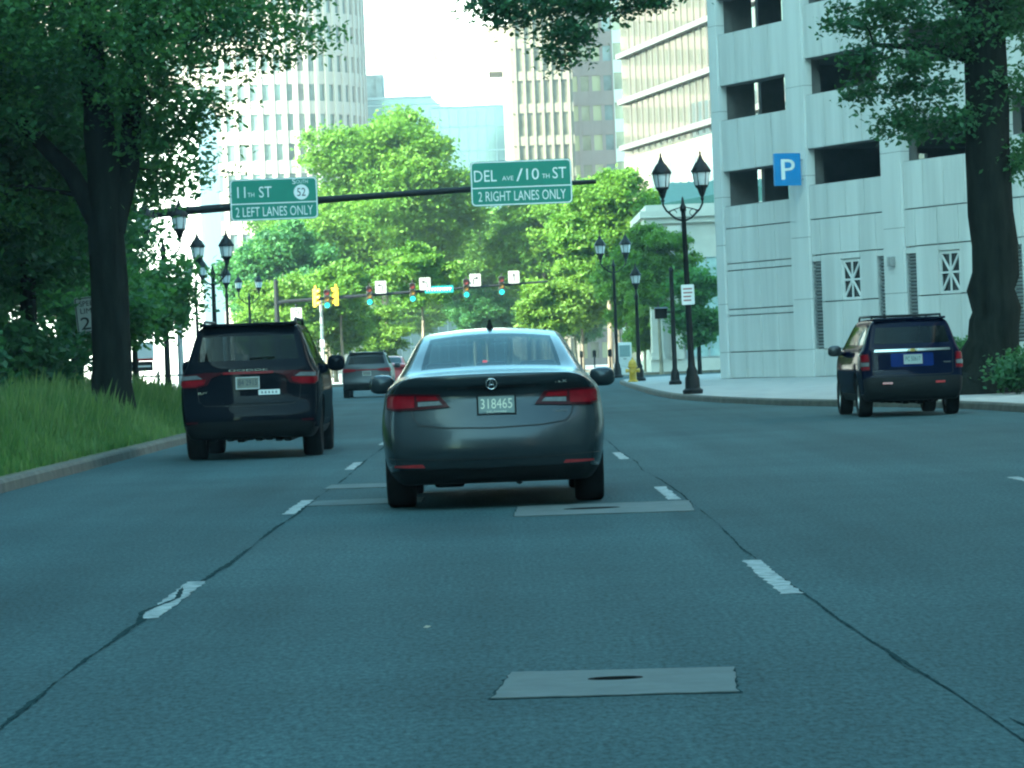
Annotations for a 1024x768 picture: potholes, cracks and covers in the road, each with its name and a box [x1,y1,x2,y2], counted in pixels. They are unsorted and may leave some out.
crack [0,446,542,729]
crack [608,441,1024,741]
